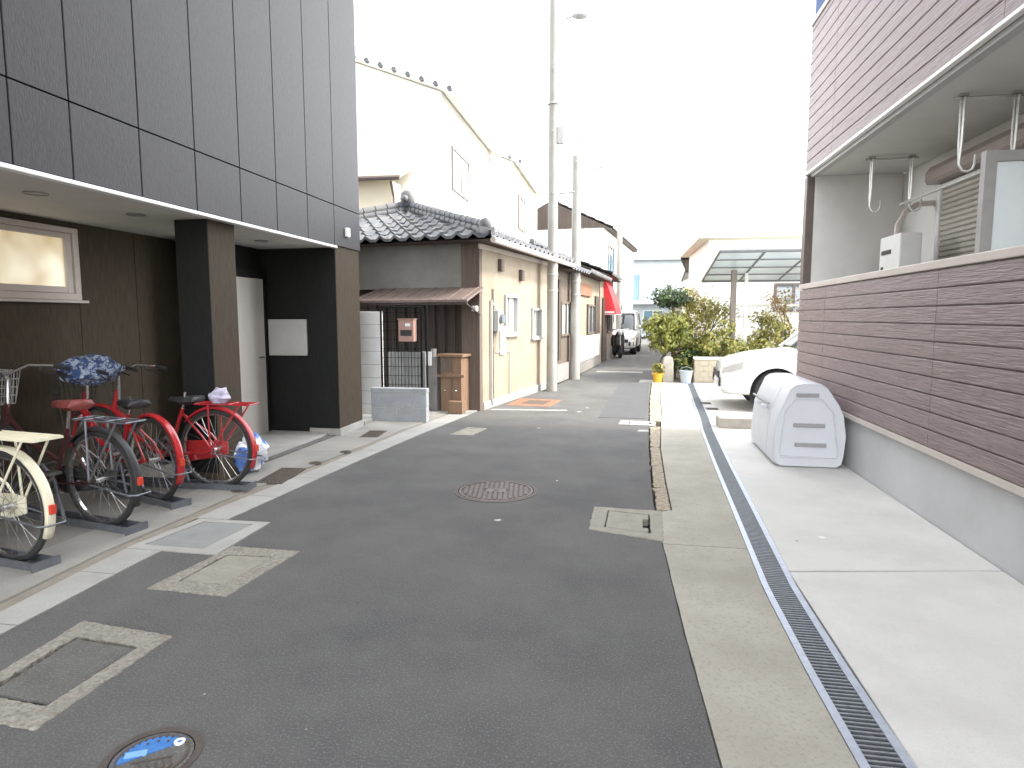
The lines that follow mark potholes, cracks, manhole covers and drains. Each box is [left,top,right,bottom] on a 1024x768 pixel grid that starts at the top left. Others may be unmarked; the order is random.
utility cover [450,427,487,436]
utility cover [0,620,172,731]
utility cover [147,546,300,597]
utility cover [126,518,270,555]
drain grate [686,382,917,768]
drain grate [588,507,664,542]
utility cover [99,727,204,768]
manhole cover [454,480,538,503]
